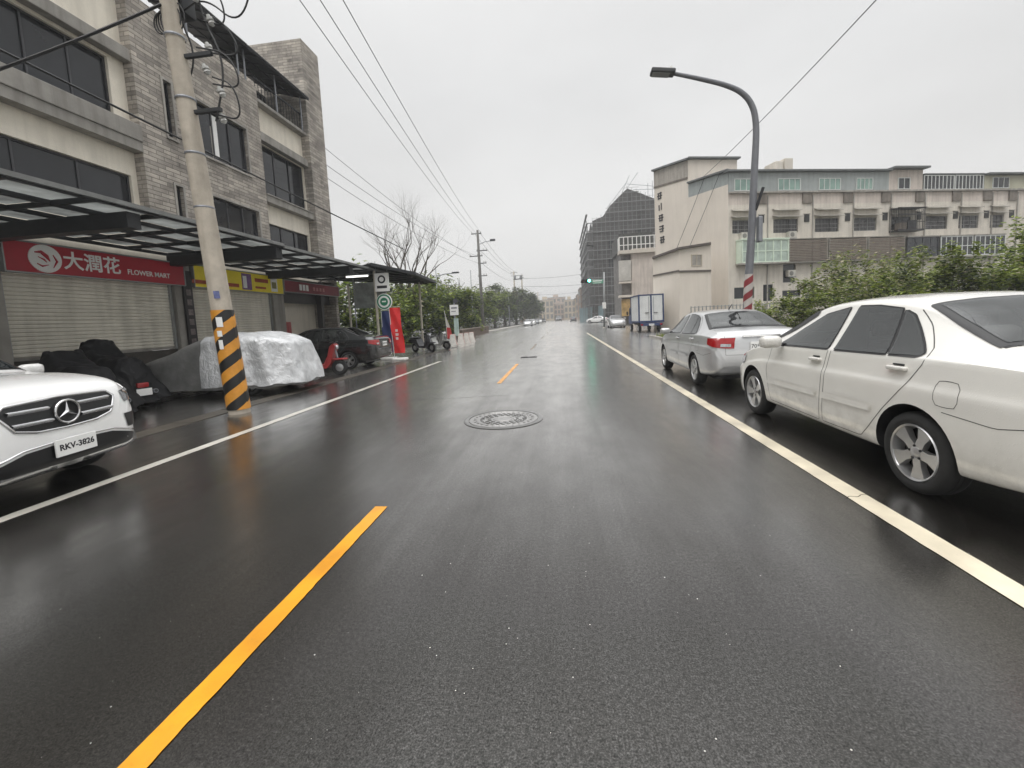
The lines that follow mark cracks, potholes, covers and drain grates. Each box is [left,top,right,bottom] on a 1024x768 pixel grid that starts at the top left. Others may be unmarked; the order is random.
manhole cover [464,410,543,429]
